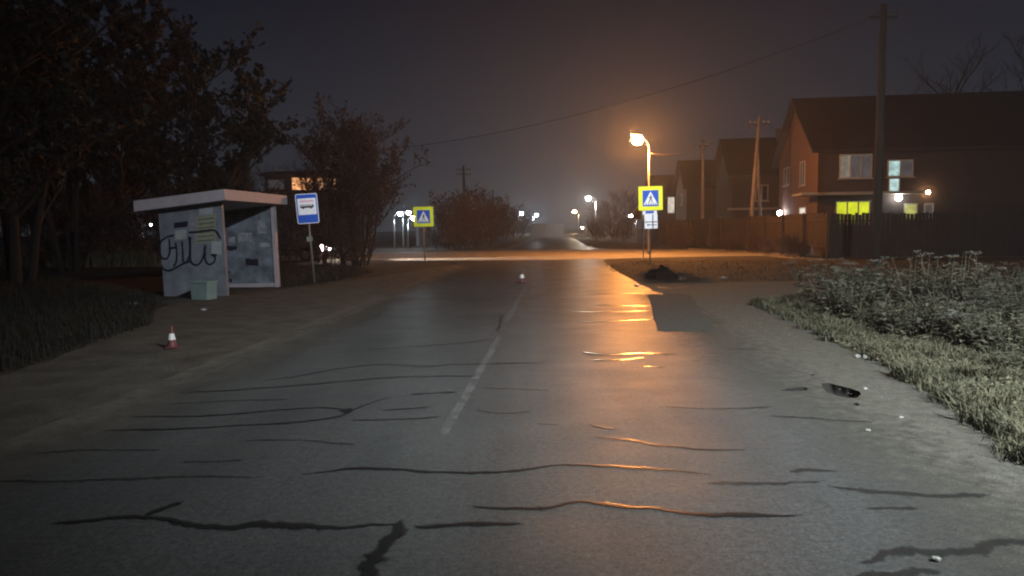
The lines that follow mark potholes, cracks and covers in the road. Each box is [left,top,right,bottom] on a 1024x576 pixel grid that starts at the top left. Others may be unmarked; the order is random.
pothole [822,383,861,398]
crack [103,315,544,444]
crack [54,425,990,576]
